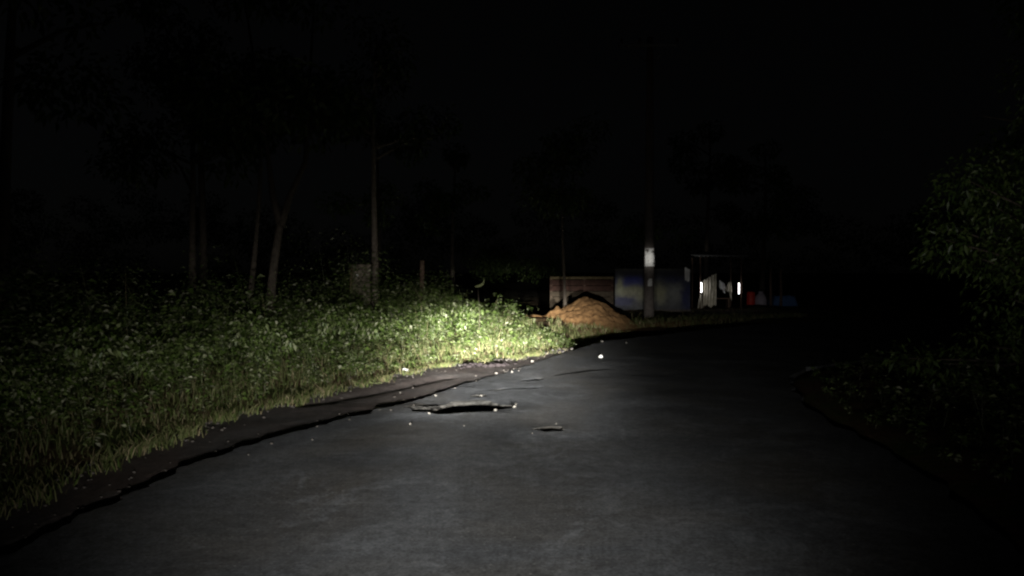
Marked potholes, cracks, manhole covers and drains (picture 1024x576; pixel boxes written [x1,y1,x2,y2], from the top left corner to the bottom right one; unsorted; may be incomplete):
pothole [403,400,513,414]
